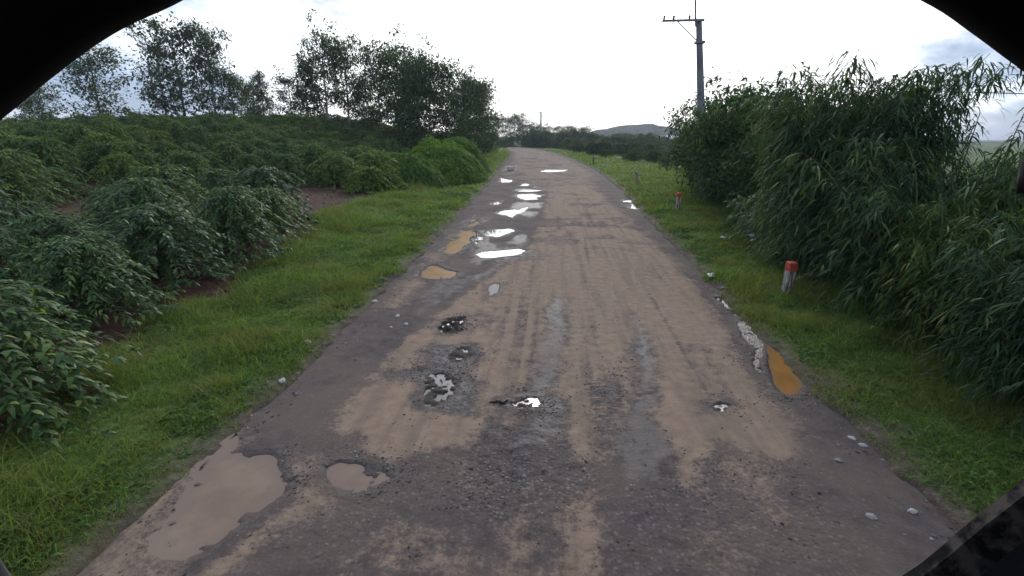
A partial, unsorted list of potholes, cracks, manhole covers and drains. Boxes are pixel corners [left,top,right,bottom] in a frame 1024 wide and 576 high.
pothole [735,322,765,374]
pothole [709,401,731,413]
pothole [497,207,528,218]
pothole [440,230,484,254]
pothole [508,396,542,409]
pothole [417,263,460,279]
pothole [134,433,297,570]
pothole [482,228,516,237]
pothole [419,370,461,408]
pothole [445,346,475,365]
pothole [765,345,807,397]
pothole [436,316,467,334]
